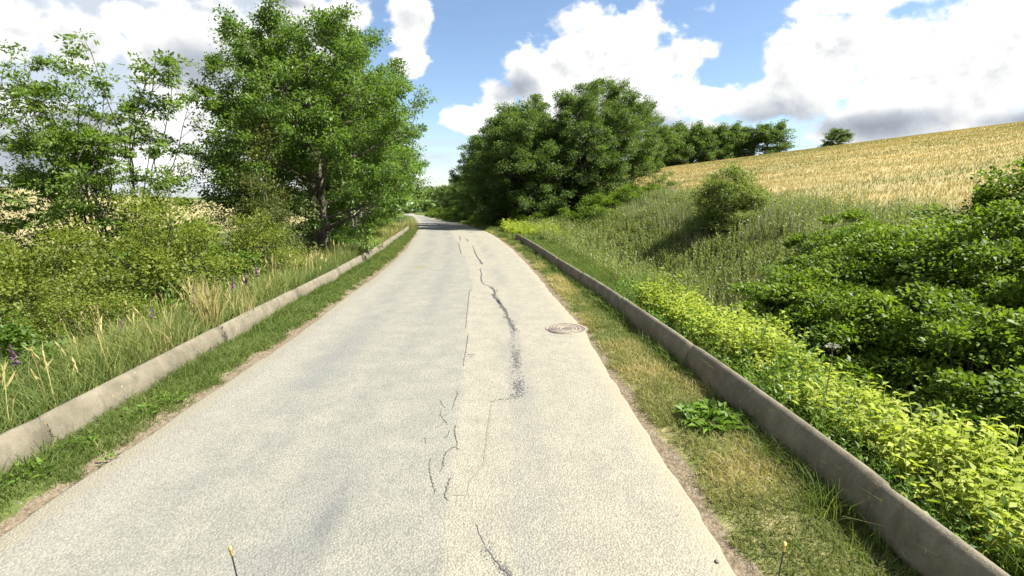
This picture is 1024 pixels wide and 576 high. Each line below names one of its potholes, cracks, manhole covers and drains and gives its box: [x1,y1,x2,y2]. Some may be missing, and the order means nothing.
crack [424,237,525,500]
crack [475,522,512,576]
manhole cover [545,323,588,335]
